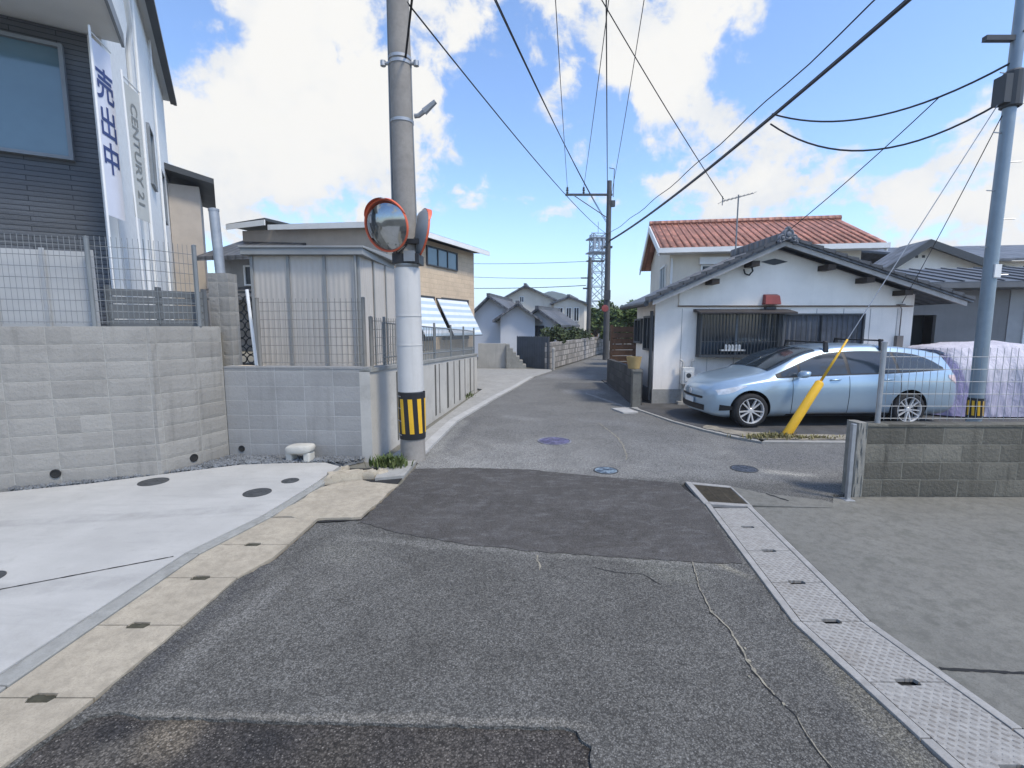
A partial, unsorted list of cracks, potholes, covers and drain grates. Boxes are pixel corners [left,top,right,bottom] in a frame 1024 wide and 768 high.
drain grate [685,481,753,508]
manhole cover [730,465,759,473]
manhole cover [537,437,572,445]
crack [692,562,833,768]
